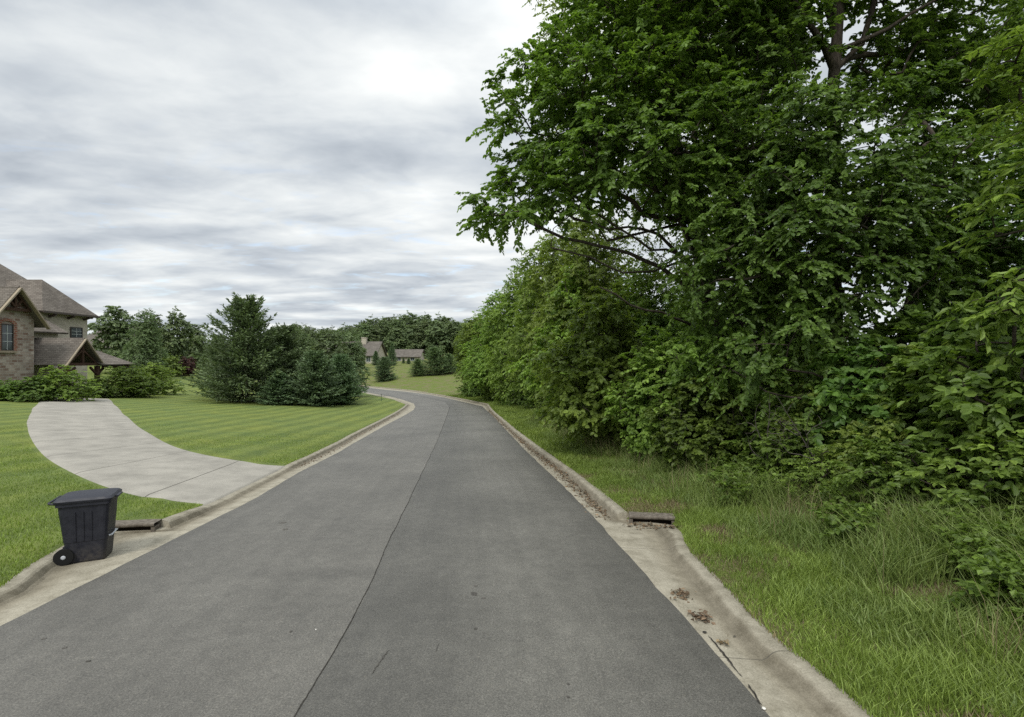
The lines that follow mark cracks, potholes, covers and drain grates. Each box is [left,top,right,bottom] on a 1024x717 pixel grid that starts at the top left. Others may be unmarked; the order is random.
crack [294,411,449,717]
crack [708,635,762,705]
drain grate [629,511,675,525]
drain grate [115,519,162,532]
